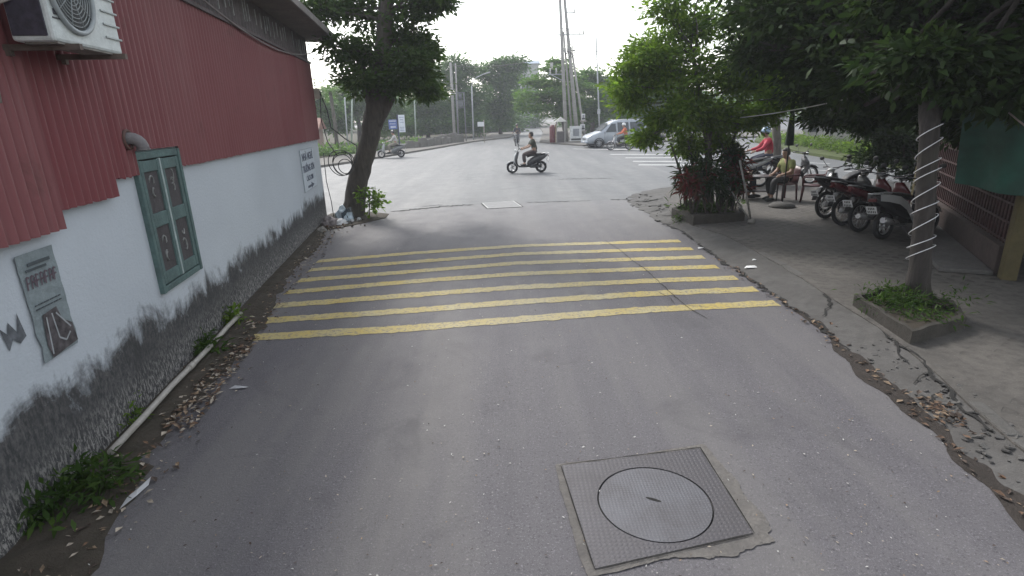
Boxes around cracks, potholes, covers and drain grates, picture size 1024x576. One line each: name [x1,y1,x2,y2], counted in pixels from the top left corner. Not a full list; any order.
crack [611,198,850,351]
crack [882,331,996,433]
manhole cover [556,444,775,576]
manhole cover [481,201,523,209]
